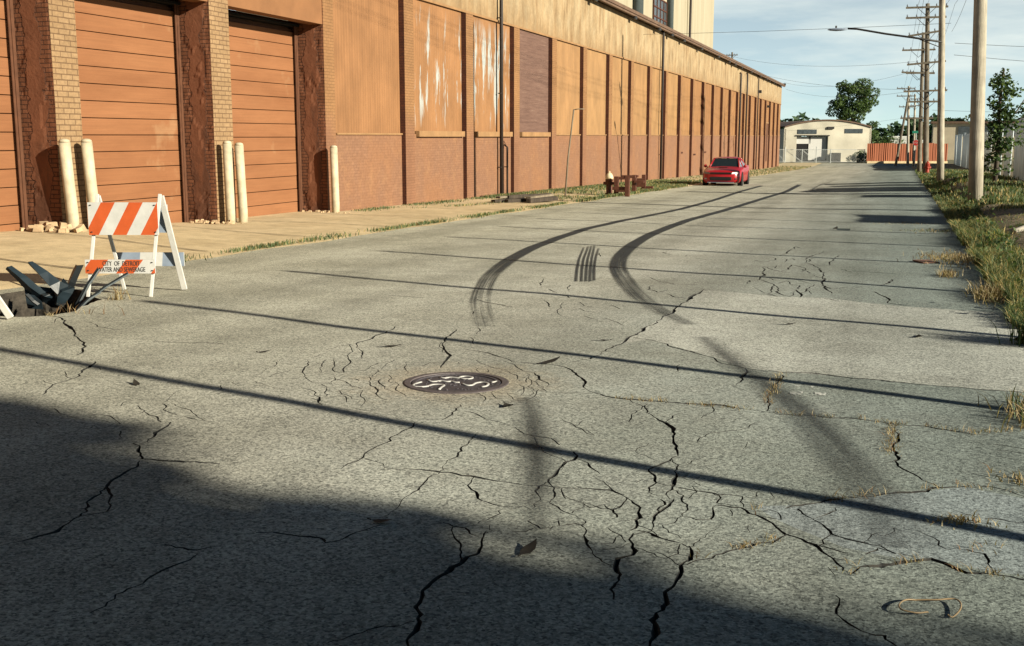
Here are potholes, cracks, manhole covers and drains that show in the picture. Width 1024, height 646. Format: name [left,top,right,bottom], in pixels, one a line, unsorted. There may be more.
manhole cover [403,372,509,394]
pothole [0,289,102,317]
crack [45,252,1024,646]
crack [0,313,236,546]
